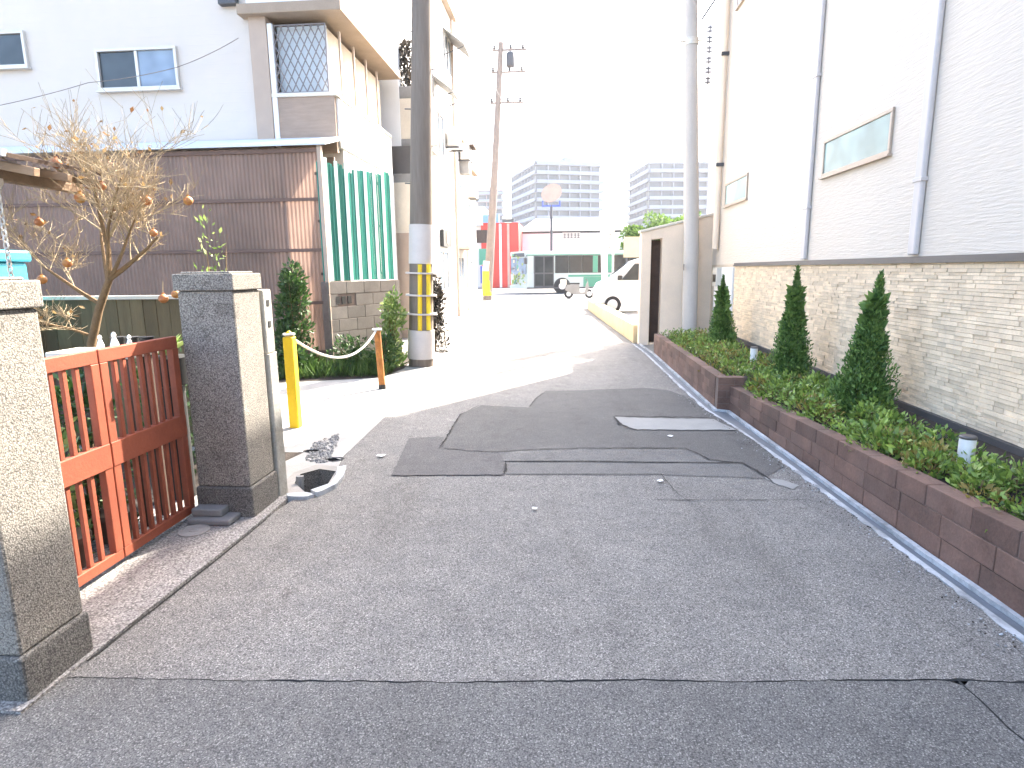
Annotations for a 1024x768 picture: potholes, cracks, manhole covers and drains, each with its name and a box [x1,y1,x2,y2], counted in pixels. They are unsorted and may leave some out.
crack [67,676,1024,741]
